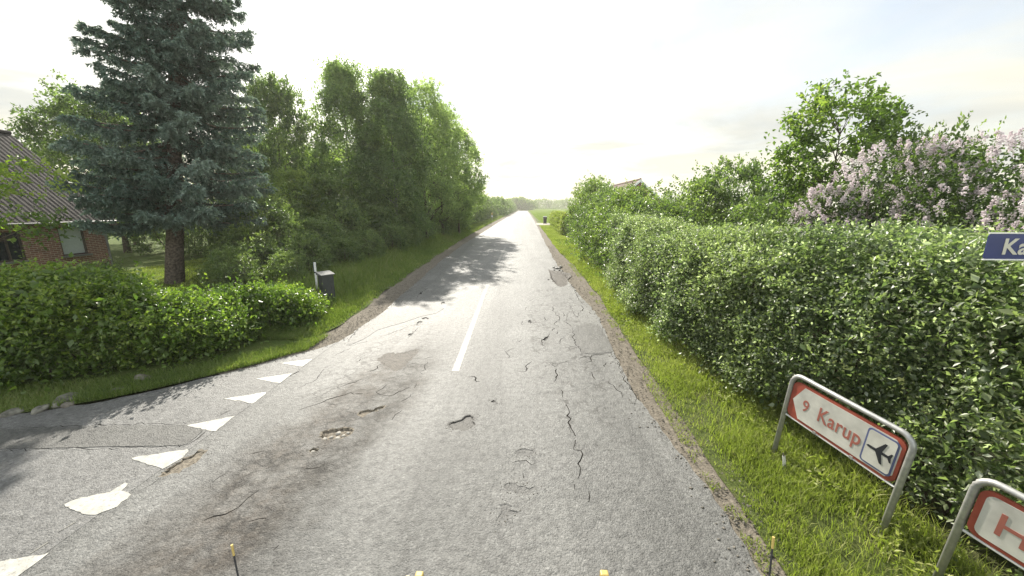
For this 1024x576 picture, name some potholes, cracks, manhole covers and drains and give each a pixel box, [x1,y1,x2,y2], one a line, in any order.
crack [205,490,266,522]
pothole [357,405,386,418]
crack [290,324,433,419]
pothole [515,448,536,457]
pothole [447,414,476,431]
pothole [319,427,354,440]
pothole [503,482,537,495]
pothole [495,503,521,522]
crack [505,269,637,501]
pothole [158,449,208,477]
